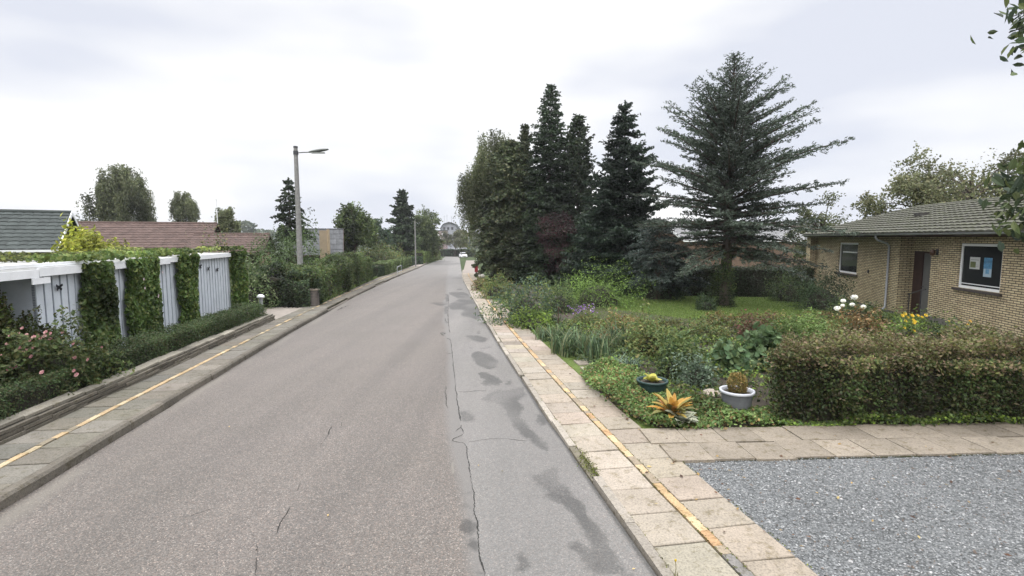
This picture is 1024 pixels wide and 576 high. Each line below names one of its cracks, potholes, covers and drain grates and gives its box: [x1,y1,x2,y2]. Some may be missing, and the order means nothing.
crack [444,333,524,575]
